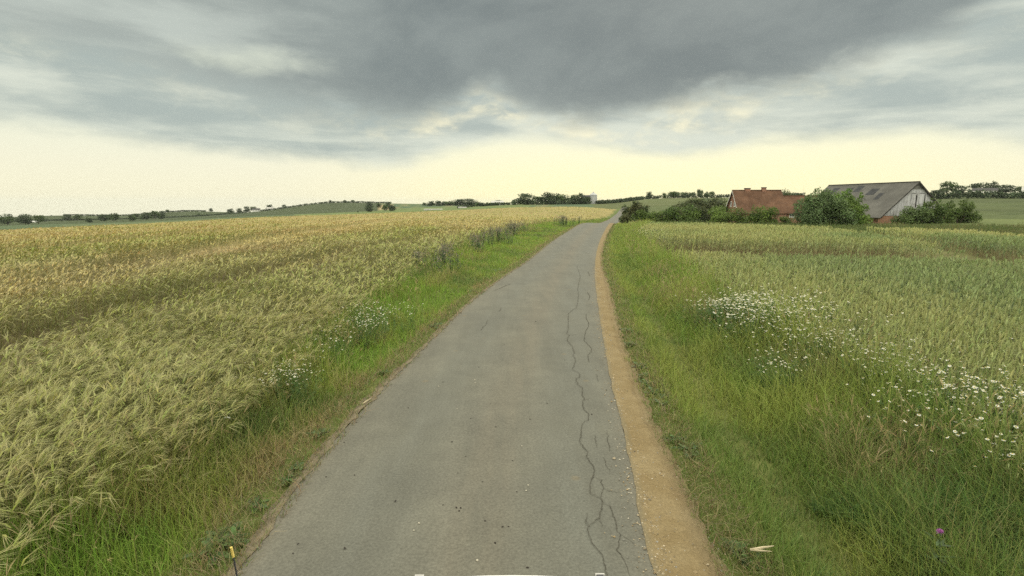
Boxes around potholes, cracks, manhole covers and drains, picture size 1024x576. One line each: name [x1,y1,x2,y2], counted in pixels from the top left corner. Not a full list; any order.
crack [566,272,634,576]
